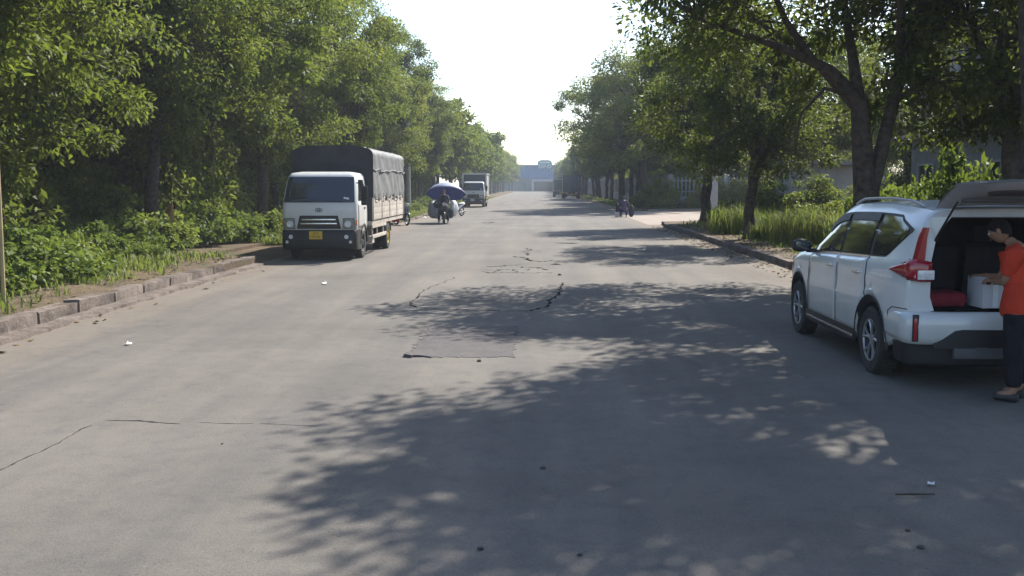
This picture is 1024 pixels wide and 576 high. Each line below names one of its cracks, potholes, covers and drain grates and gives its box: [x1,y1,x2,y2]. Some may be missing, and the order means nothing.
crack [409,248,564,311]
crack [0,420,310,471]
